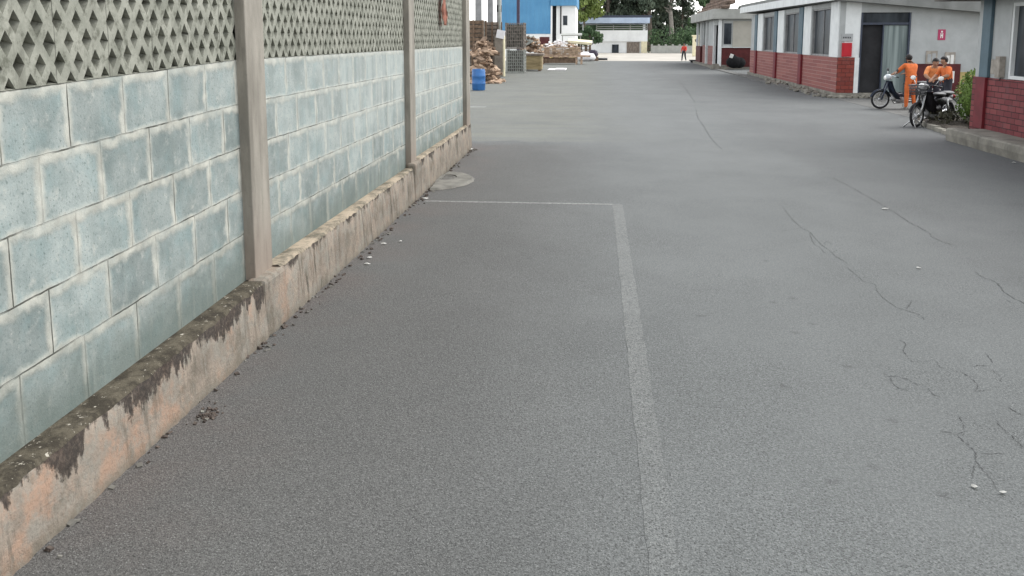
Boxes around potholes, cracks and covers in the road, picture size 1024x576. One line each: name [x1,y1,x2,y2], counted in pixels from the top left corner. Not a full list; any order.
crack [890,342,1024,489]
manhole cover [430,171,475,191]
